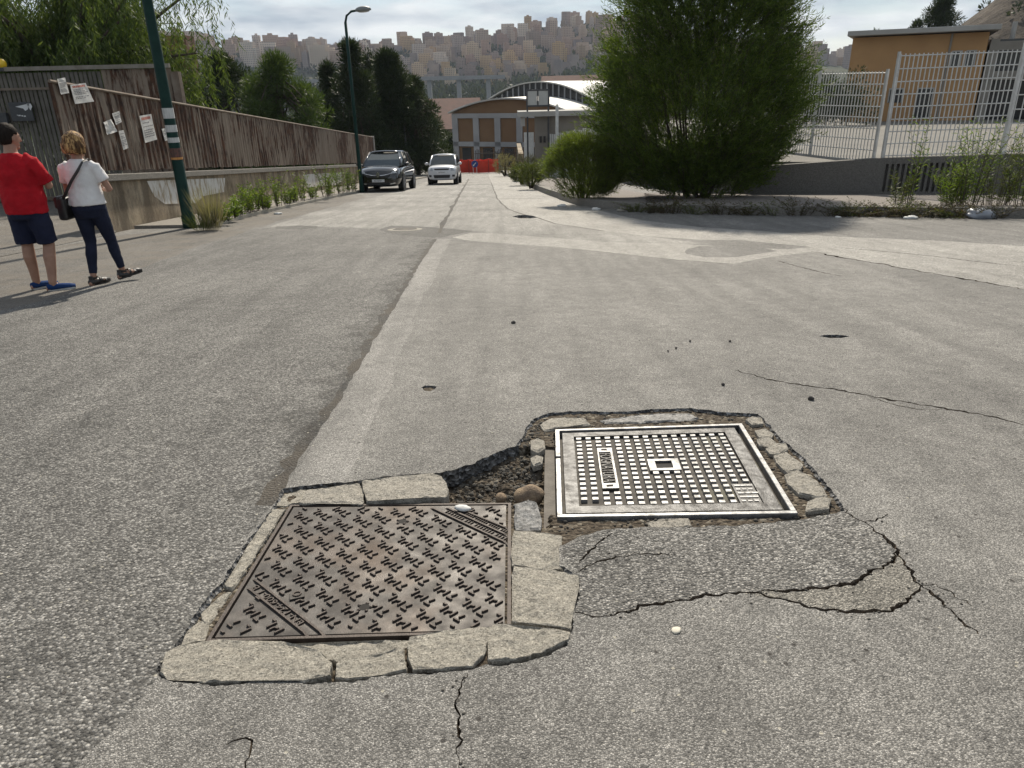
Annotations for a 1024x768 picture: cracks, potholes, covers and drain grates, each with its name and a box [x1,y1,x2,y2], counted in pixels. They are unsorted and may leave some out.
manhole cover [206,503,511,643]
crack [454,674,468,768]
crack [737,370,1023,425]
crack [226,737,253,768]
crack [575,508,979,634]
